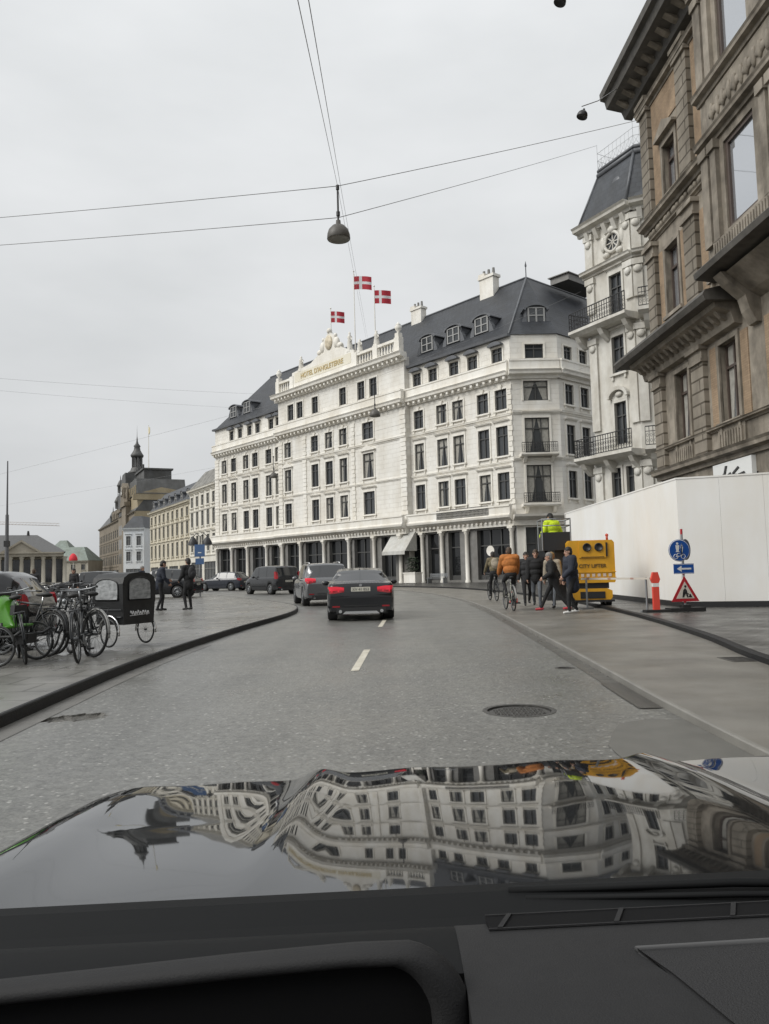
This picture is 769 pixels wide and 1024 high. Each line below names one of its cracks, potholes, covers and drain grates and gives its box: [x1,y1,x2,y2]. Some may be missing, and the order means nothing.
pothole [41,713,110,723]
manhole cover [482,704,557,717]
